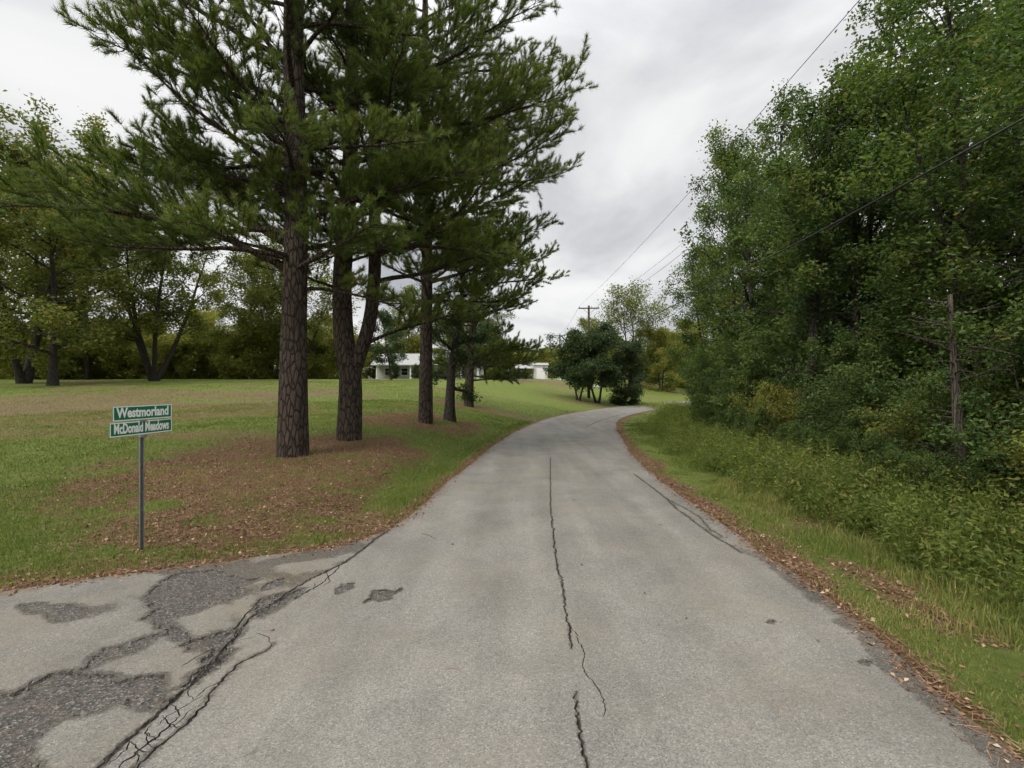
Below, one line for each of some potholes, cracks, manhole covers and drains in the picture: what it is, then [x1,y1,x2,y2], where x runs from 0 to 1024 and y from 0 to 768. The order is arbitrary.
crack [96,527,393,768]
crack [549,459,606,768]
crack [634,474,742,554]
